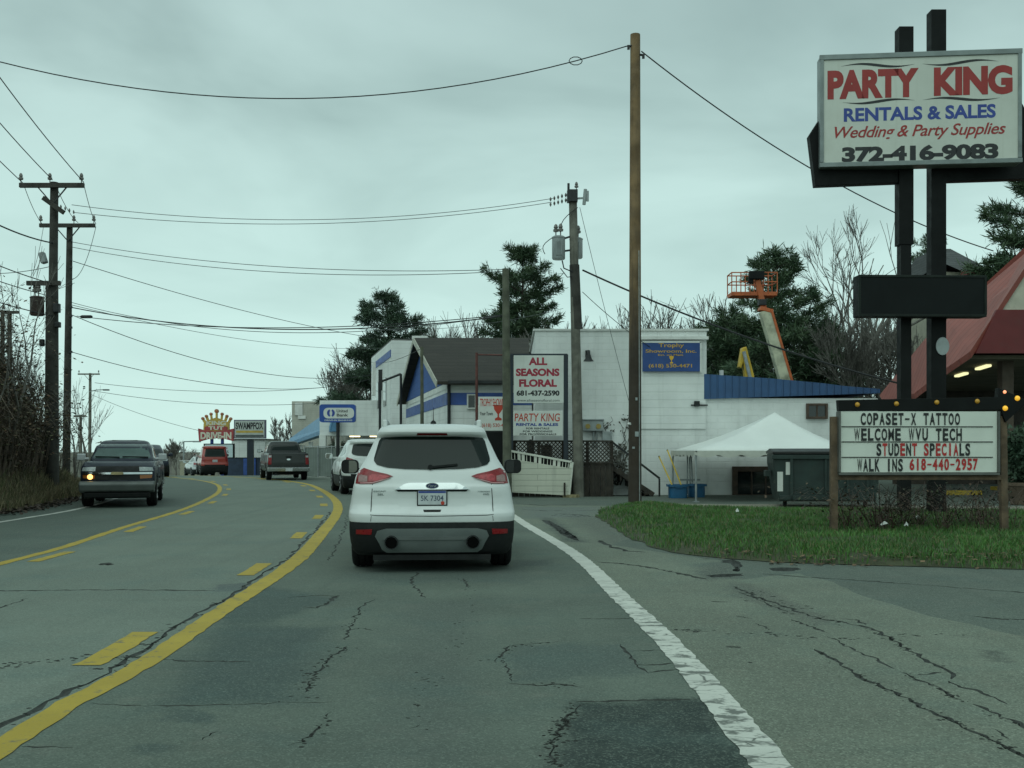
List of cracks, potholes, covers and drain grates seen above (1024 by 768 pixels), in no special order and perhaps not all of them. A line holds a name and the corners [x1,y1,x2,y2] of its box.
crack [406,579,588,767]
crack [278,595,375,748]
crack [410,572,426,598]
crack [674,574,1024,758]
crack [327,515,348,561]
